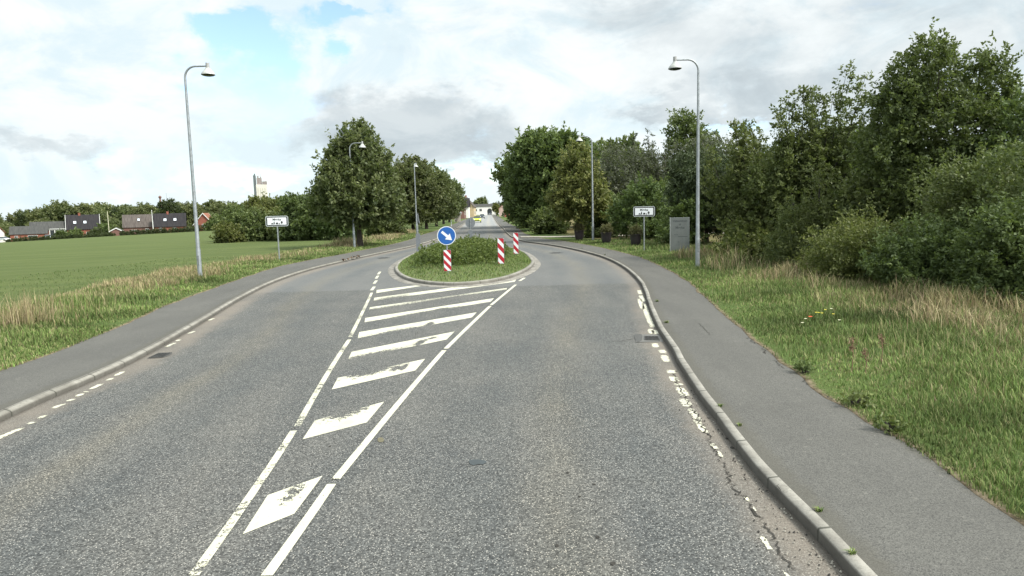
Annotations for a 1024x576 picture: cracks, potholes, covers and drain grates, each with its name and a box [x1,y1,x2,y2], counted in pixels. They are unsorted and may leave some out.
crack [673,374,796,570]
